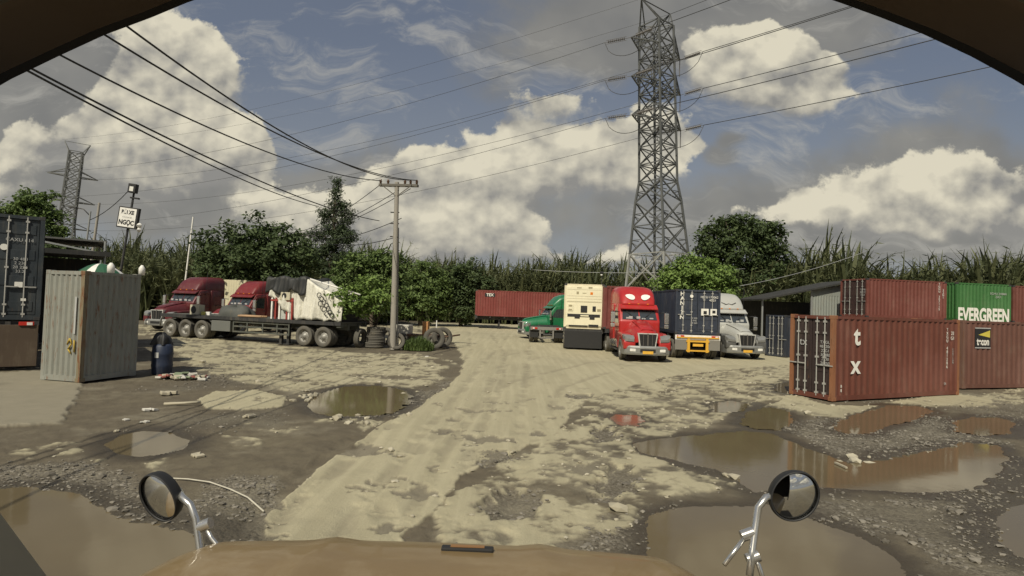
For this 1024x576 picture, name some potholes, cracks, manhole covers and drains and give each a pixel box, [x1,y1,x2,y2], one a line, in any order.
pothole [949,416,1020,436]
pothole [609,414,645,427]
pothole [98,429,195,458]
pothole [0,484,206,576]
pothole [642,502,911,576]
pothole [306,385,414,417]
pothole [628,431,1017,494]
pothole [984,500,1024,559]
pothole [739,406,795,431]
pothole [833,405,935,434]
